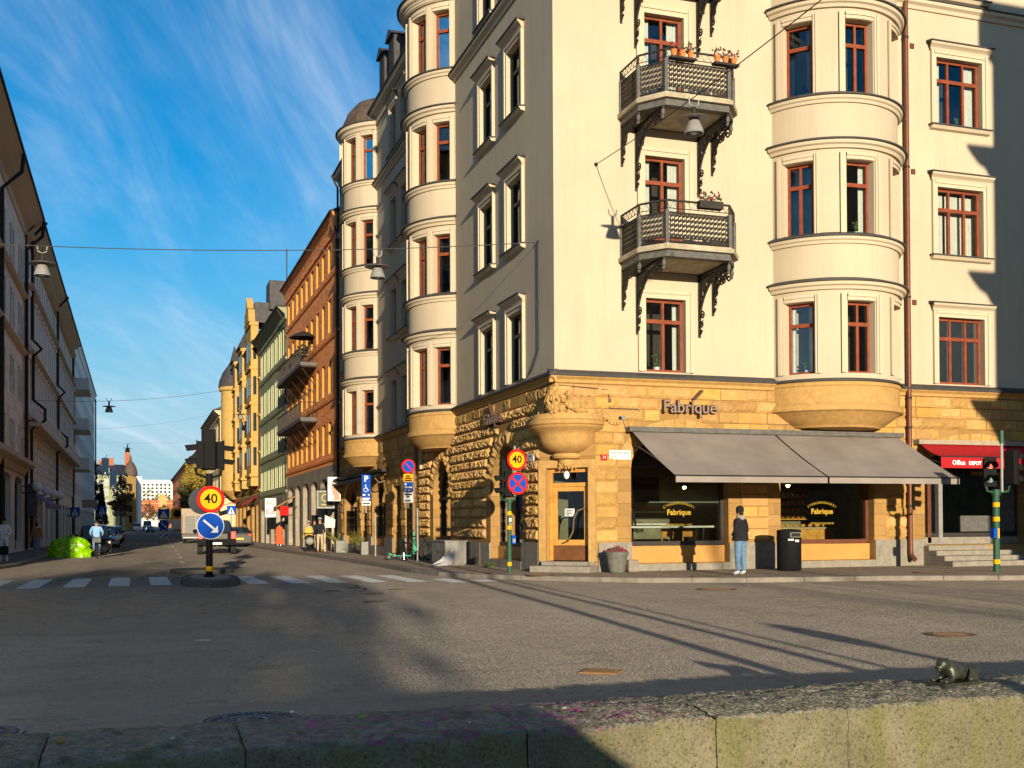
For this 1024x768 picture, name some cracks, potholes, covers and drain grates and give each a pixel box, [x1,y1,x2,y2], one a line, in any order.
manhole cover [0,724,25,735]
manhole cover [198,711,305,726]
